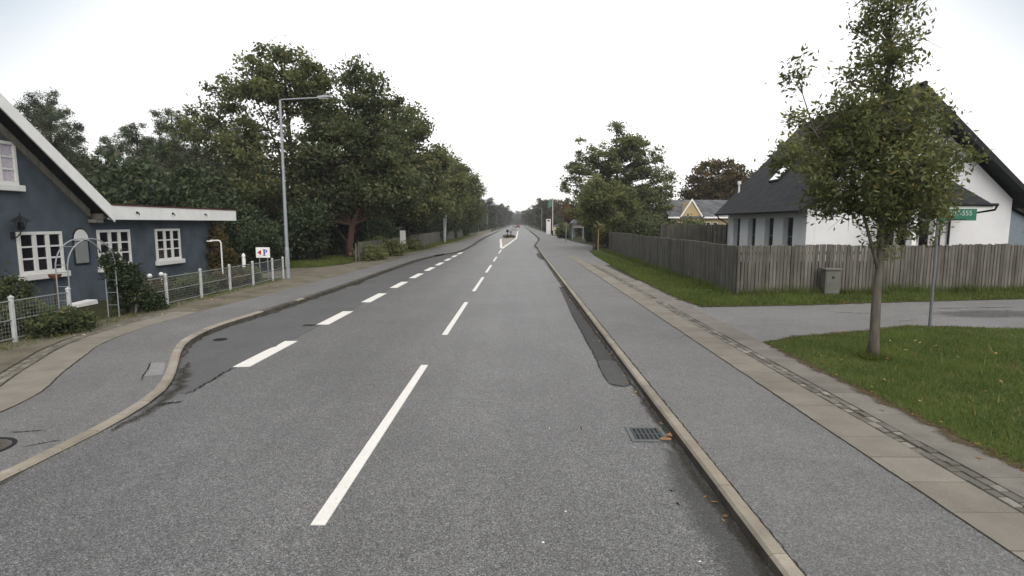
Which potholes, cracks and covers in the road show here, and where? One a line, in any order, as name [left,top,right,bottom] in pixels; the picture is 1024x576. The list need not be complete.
manhole cover [0,437,17,452]
drain grate [625,427,671,442]
